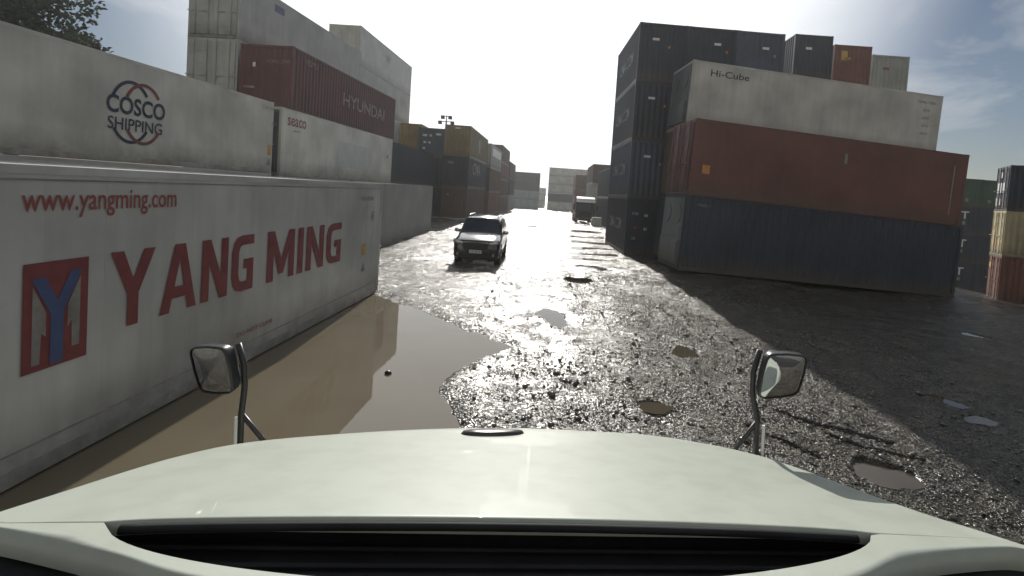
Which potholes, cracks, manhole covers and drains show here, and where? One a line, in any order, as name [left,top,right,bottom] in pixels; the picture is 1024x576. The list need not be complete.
pothole [635,399,677,417]
pothole [923,392,974,410]
pothole [535,308,568,329]
pothole [563,276,596,284]
pothole [957,331,995,340]
pothole [962,415,1001,427]
pothole [670,344,702,359]
pothole [845,454,932,491]
